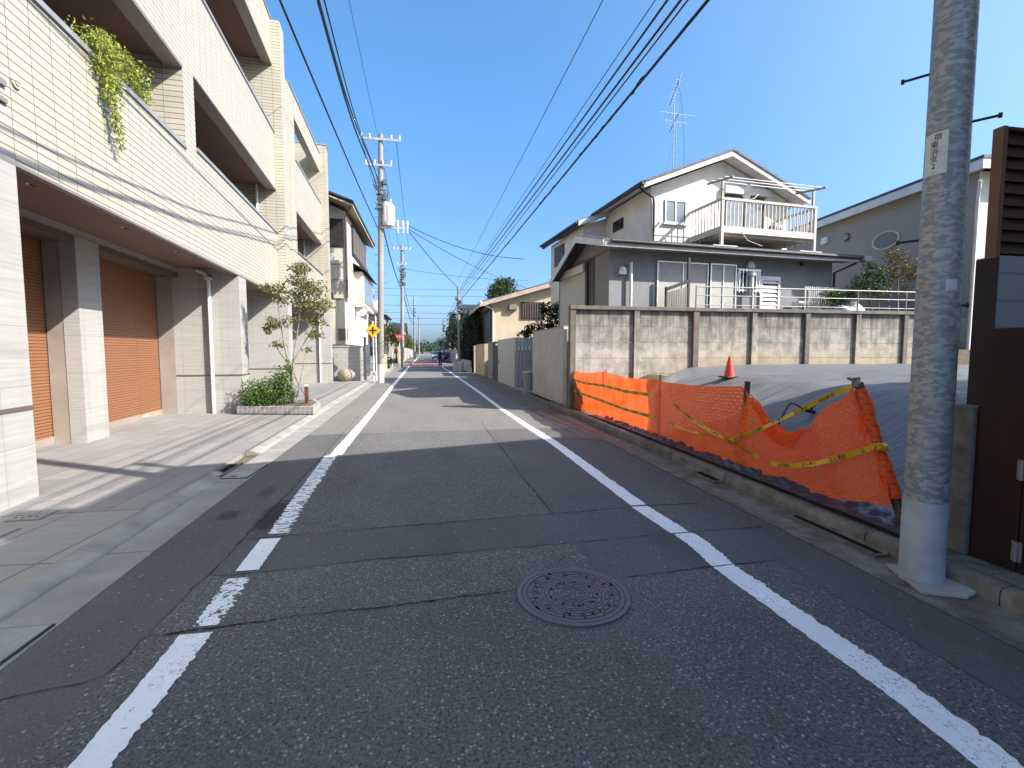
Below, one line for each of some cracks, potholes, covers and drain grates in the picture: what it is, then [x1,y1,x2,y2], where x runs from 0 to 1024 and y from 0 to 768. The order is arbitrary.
drain grate [690,471,724,484]
manhole cover [517,568,631,628]
drain grate [216,462,243,477]
drain grate [785,512,890,558]
